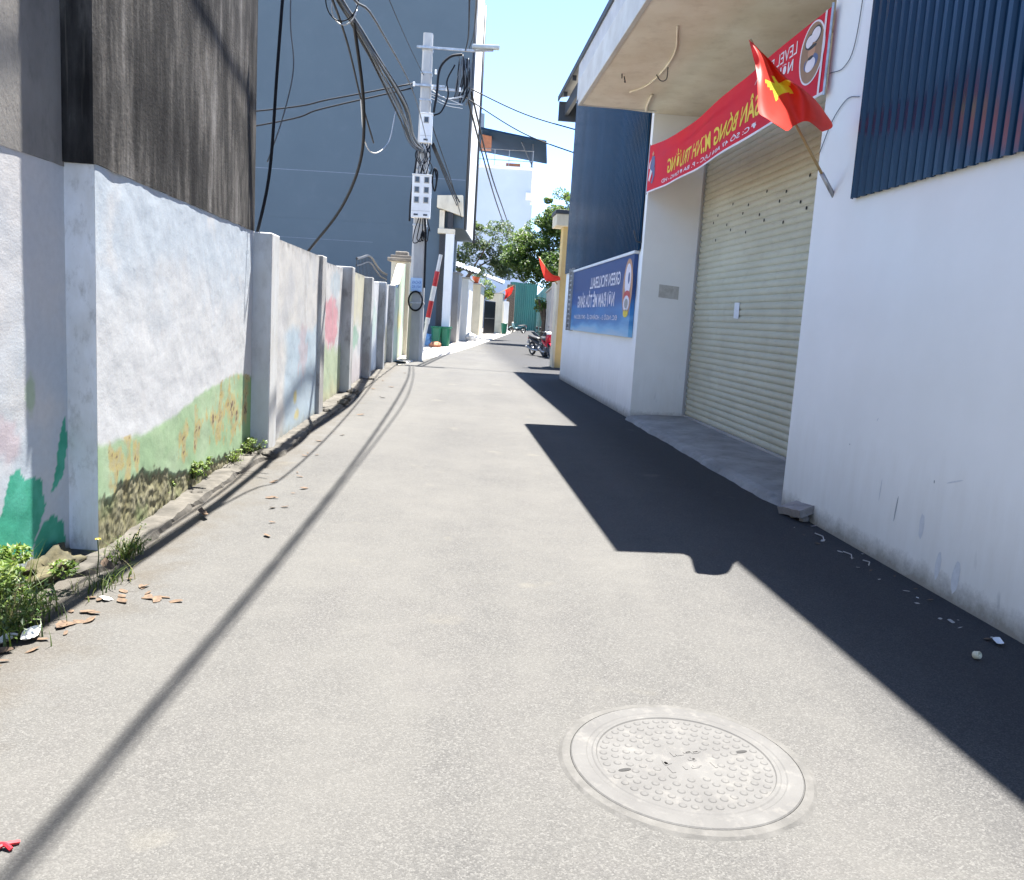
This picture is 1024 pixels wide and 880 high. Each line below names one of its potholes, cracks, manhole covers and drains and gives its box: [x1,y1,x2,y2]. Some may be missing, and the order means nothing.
manhole cover [558,704,817,841]
